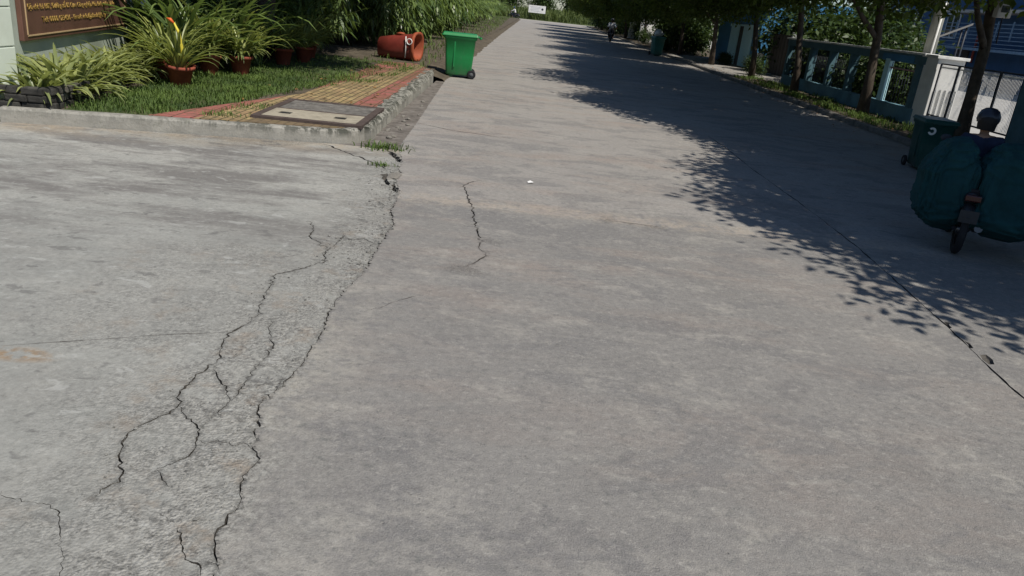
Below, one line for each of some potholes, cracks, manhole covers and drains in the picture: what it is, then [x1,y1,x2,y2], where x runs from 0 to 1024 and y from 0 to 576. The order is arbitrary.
crack [2,495,65,576]
manhole cover [250,98,384,130]
crack [4,333,202,346]
crack [99,200,397,576]
crack [462,181,486,266]
